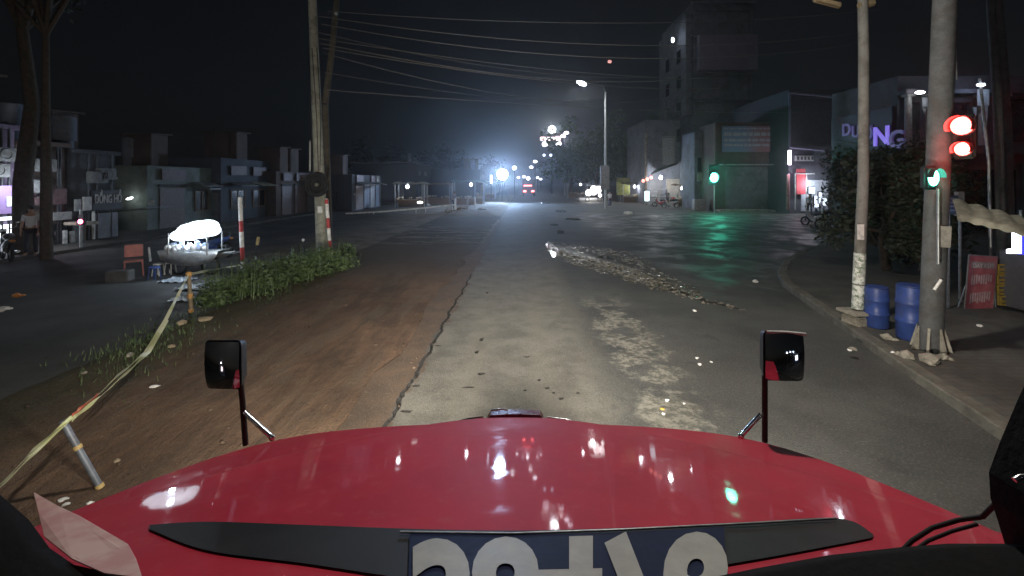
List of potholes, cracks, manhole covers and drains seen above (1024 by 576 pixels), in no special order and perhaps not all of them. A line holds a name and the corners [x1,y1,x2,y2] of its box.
crack [382,273,472,427]
